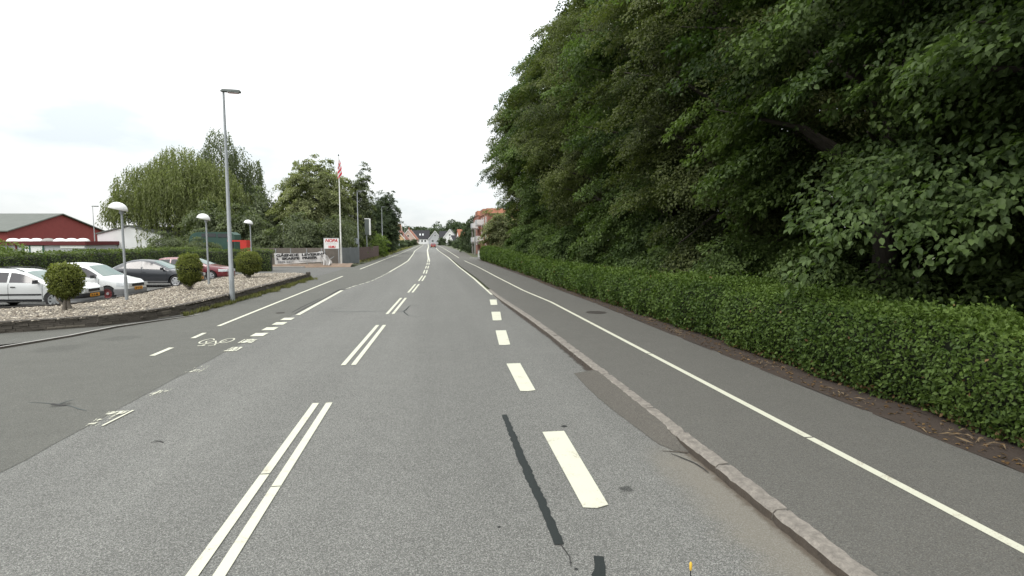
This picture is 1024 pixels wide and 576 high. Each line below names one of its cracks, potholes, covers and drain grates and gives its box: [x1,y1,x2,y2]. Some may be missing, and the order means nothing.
crack [28,399,84,410]
crack [662,450,709,473]
